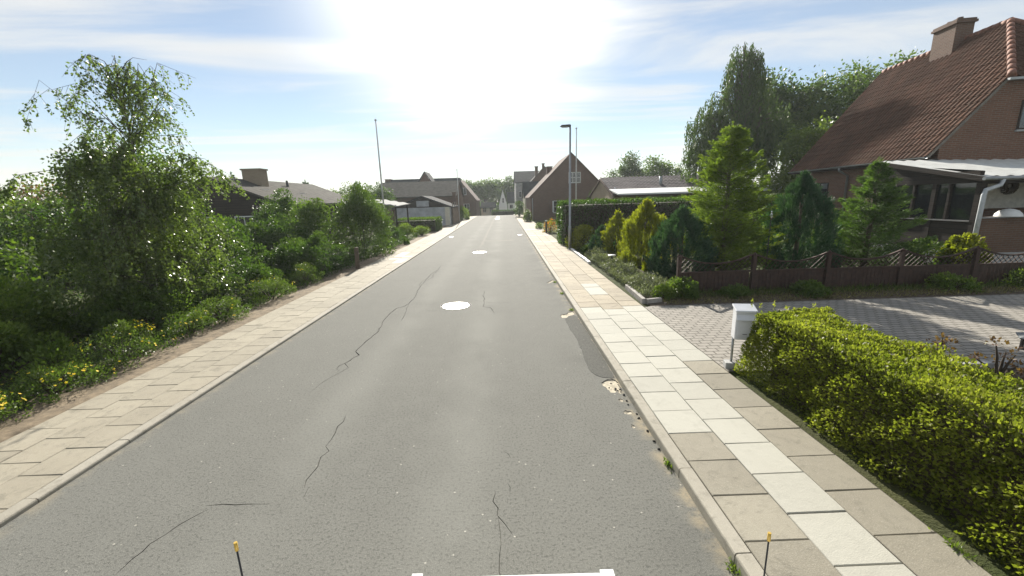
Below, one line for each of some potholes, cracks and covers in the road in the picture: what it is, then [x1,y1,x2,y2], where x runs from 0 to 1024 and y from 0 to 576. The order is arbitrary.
crack [123,504,245,568]
crack [493,453,510,575]
manhole cover [440,302,472,310]
crack [309,272,436,393]
pothole [601,379,622,394]
